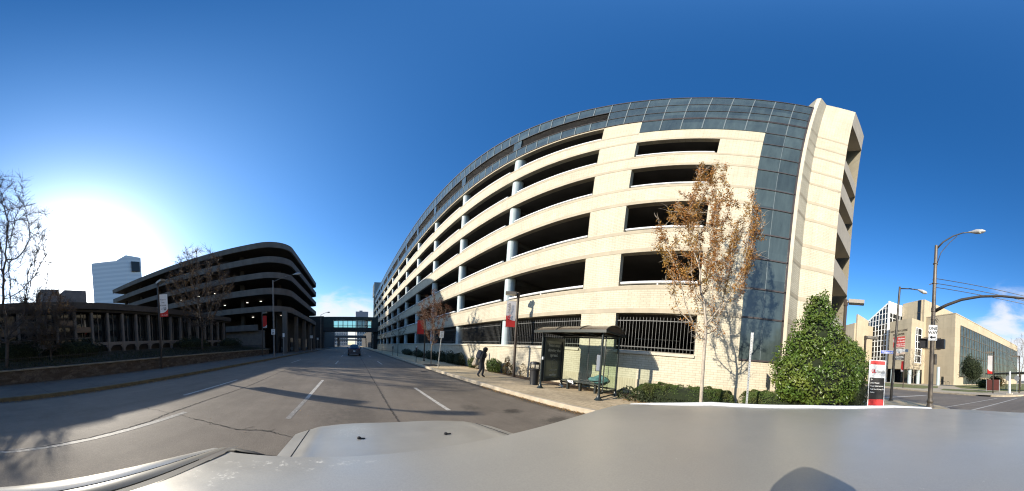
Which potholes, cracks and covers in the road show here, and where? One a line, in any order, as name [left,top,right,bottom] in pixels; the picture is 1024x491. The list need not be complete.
crack [145,407,291,437]
